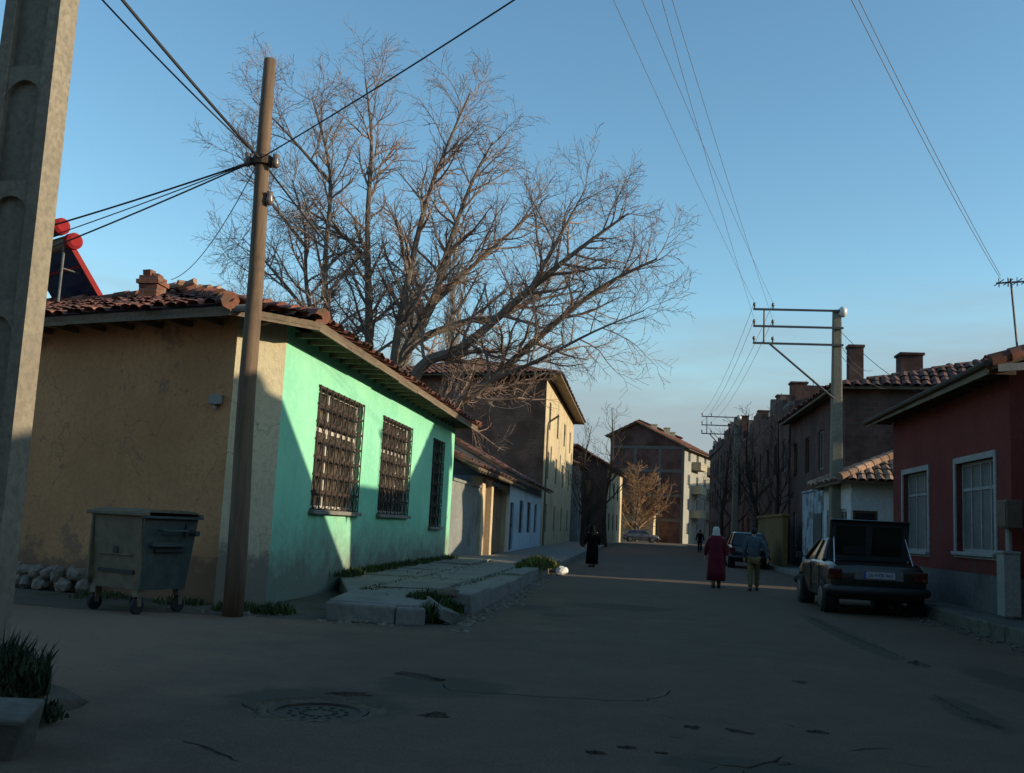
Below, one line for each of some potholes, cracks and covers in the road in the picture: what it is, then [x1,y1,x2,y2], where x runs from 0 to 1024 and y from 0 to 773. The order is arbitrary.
crack [182,740,242,762]
crack [695,756,793,773]
crack [934,695,969,715]
manhole cover [250,697,389,724]
crack [443,684,682,738]
pothole [393,671,446,682]
